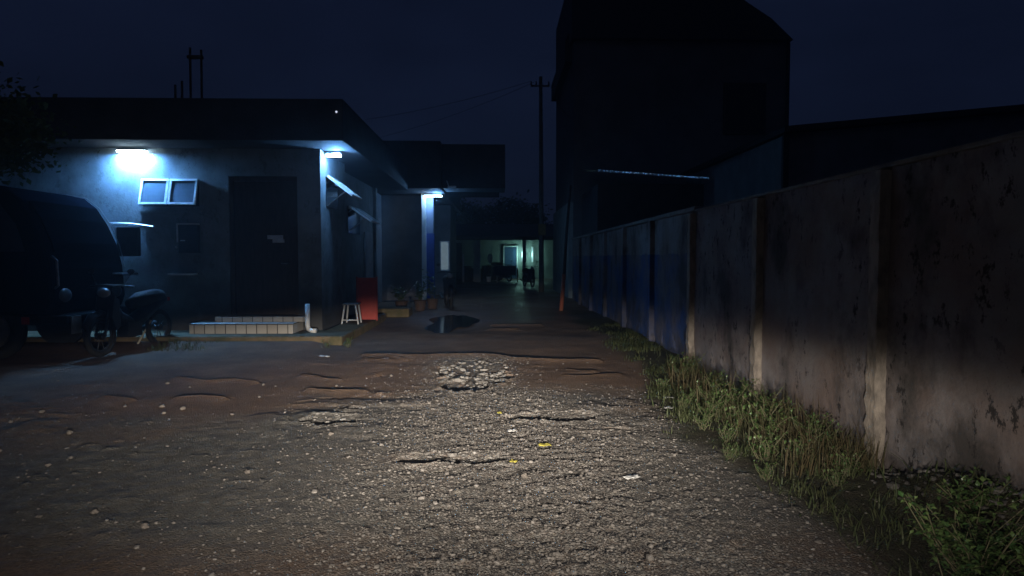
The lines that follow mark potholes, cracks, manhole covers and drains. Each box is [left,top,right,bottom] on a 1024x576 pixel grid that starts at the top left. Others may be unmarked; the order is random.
crack [100,376,265,401]
pothole [431,360,517,393]
crack [299,353,625,393]
